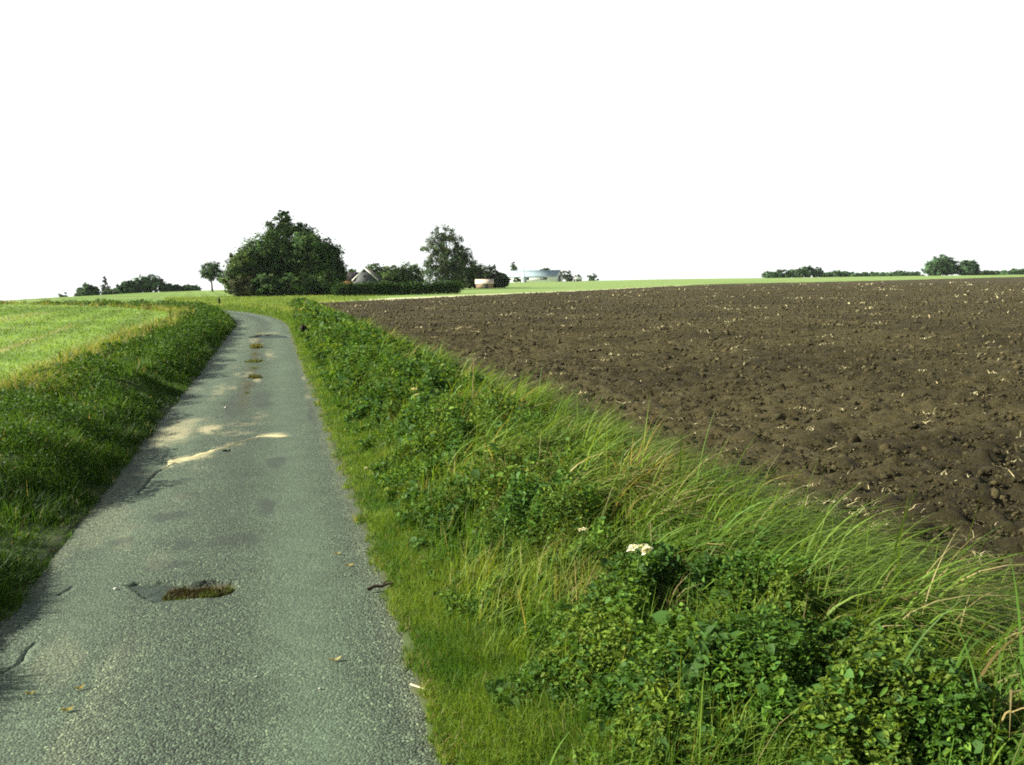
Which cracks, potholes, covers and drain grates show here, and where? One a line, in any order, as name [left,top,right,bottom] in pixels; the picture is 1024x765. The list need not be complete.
pothole [118,577,245,605]
crack [0,643,38,676]
